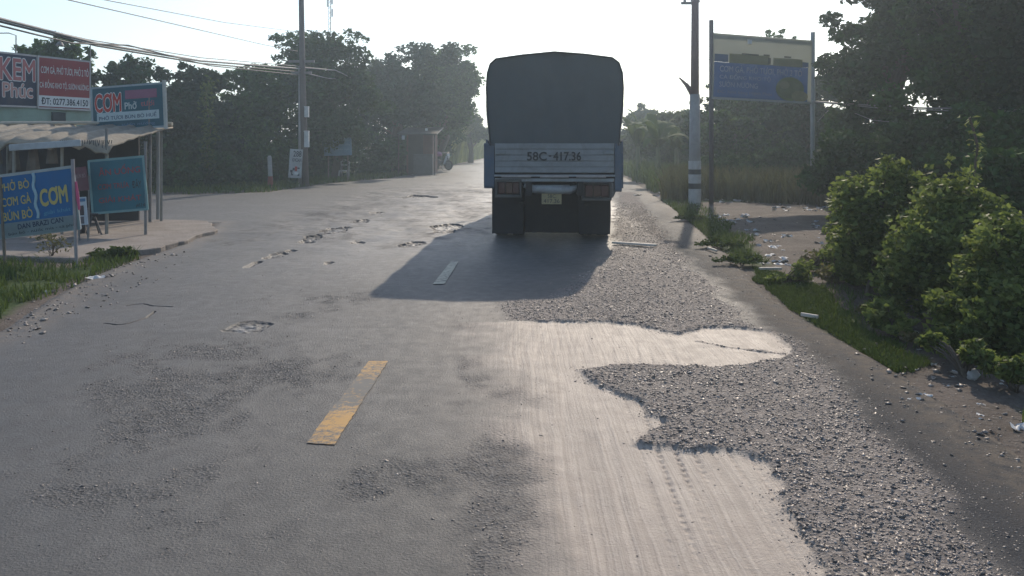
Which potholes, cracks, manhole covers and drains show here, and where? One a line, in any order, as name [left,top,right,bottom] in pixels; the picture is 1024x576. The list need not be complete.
pothole [427,223,465,235]
pothole [392,240,430,248]
pothole [316,226,355,236]
pothole [214,318,278,336]
crack [97,302,177,326]
